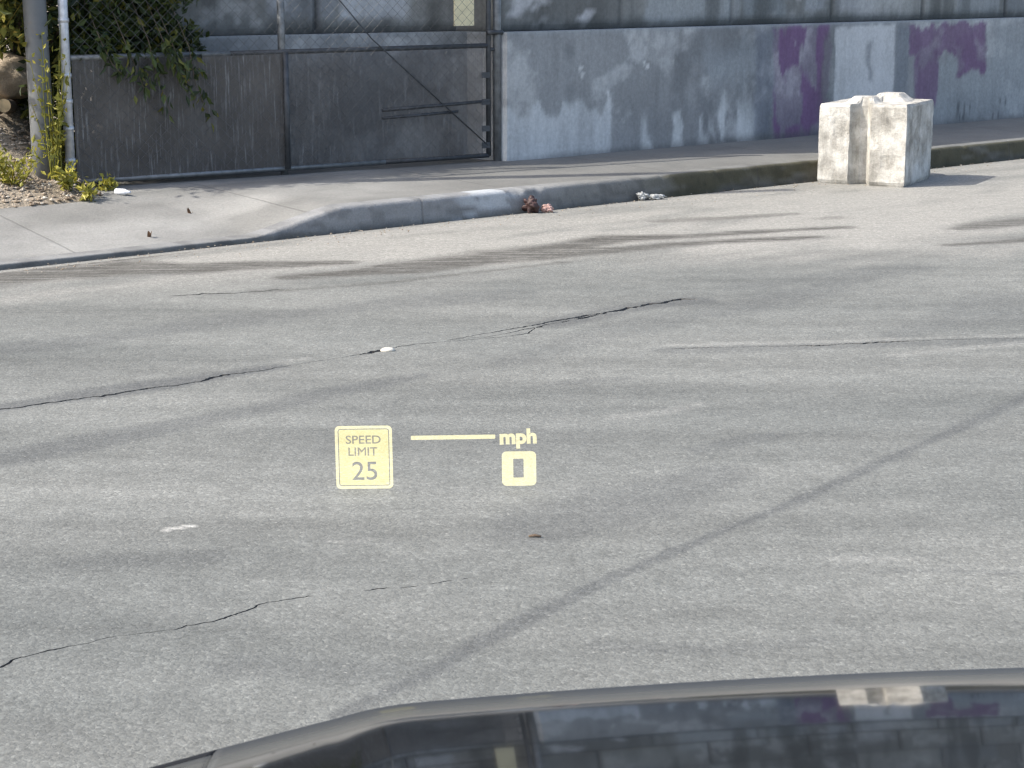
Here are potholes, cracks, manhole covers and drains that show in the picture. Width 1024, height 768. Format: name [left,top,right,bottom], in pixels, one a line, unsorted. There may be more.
crack [177,288,287,296]
crack [0,298,694,410]
crack [0,578,467,668]
